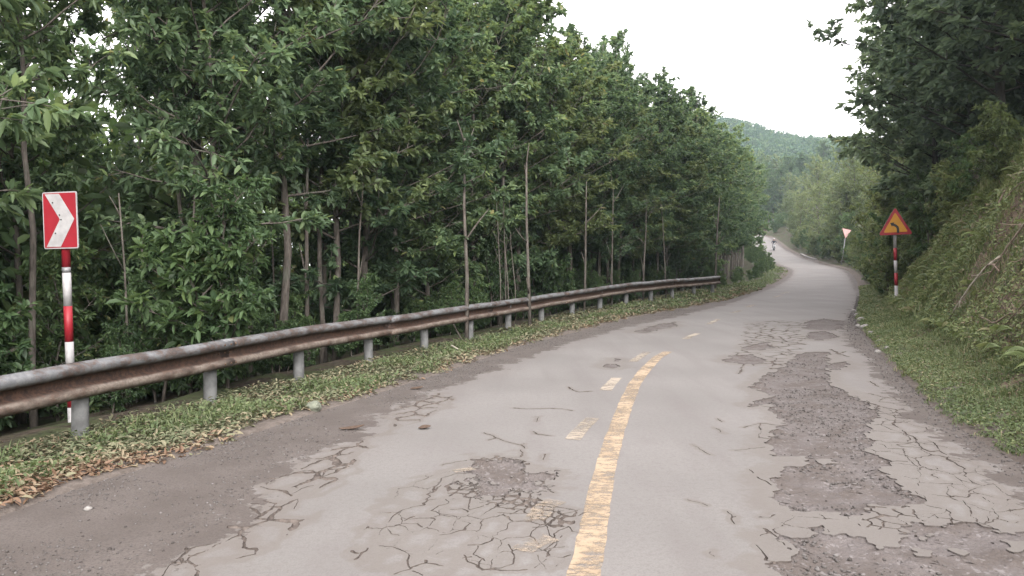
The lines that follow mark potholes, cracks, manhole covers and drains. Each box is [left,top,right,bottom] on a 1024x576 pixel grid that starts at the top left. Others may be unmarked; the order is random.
crack [735,321,807,374]
pothole [801,318,847,330]
crack [162,440,368,576]
crack [350,408,586,576]
crack [393,393,454,426]
pothole [748,352,1024,576]
pothole [805,331,839,340]
pothole [449,457,560,505]
pothole [722,354,768,365]
crack [847,381,1024,527]
